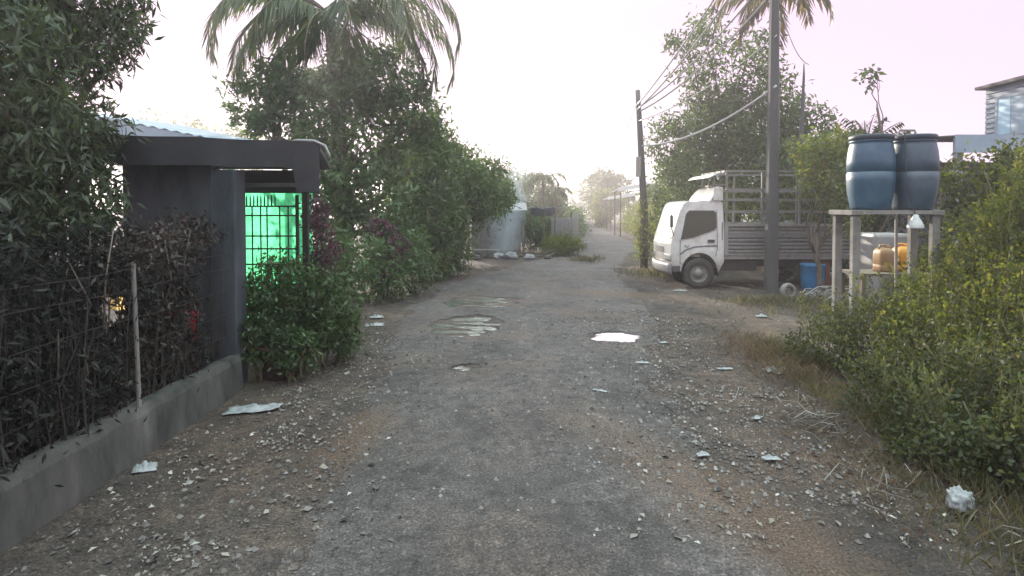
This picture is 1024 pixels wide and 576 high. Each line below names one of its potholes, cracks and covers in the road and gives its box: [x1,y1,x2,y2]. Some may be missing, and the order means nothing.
pothole [589,332,645,342]
pothole [427,314,505,337]
pothole [444,296,523,309]
